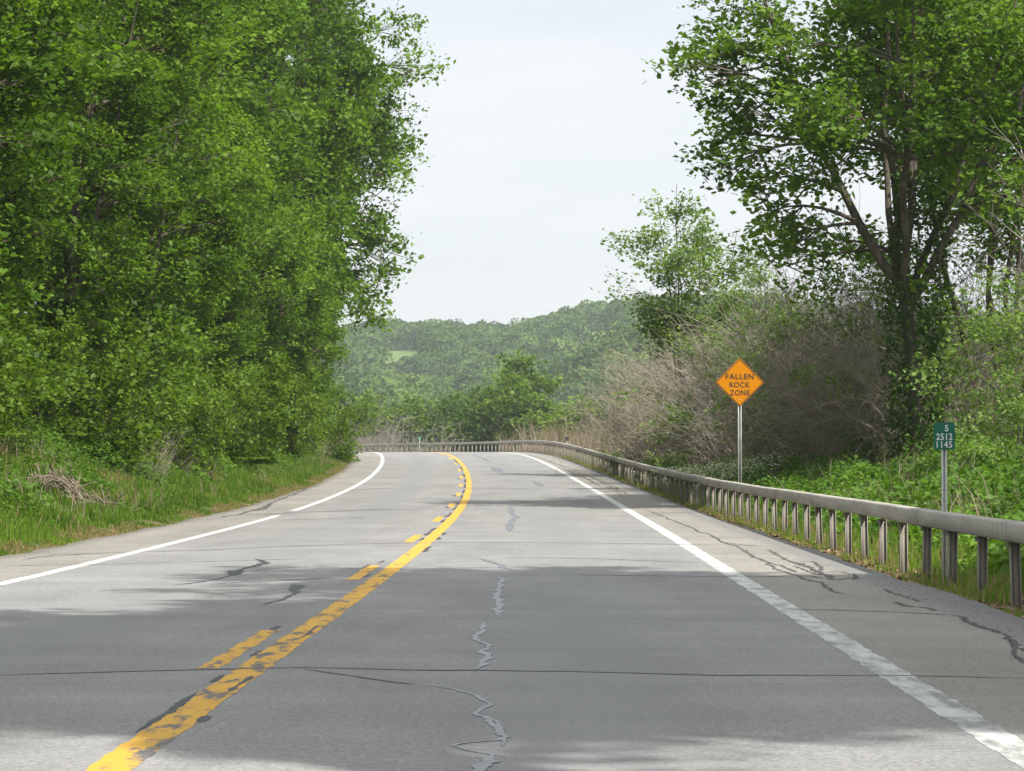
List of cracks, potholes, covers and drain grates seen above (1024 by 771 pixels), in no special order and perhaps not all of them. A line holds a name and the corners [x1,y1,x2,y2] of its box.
crack [8,588,1024,684]
crack [17,454,872,604]
